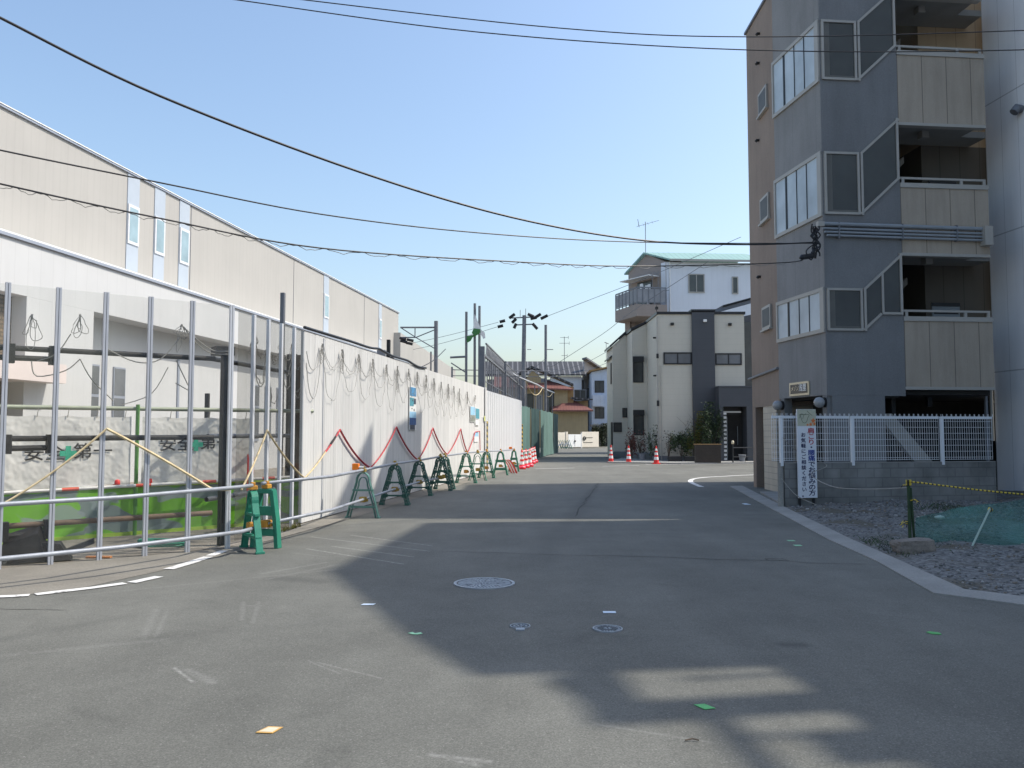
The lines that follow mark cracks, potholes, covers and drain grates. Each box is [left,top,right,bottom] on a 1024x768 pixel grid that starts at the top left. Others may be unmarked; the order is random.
manhole cover [593,624,623,633]
manhole cover [510,623,530,631]
manhole cover [454,577,515,590]
